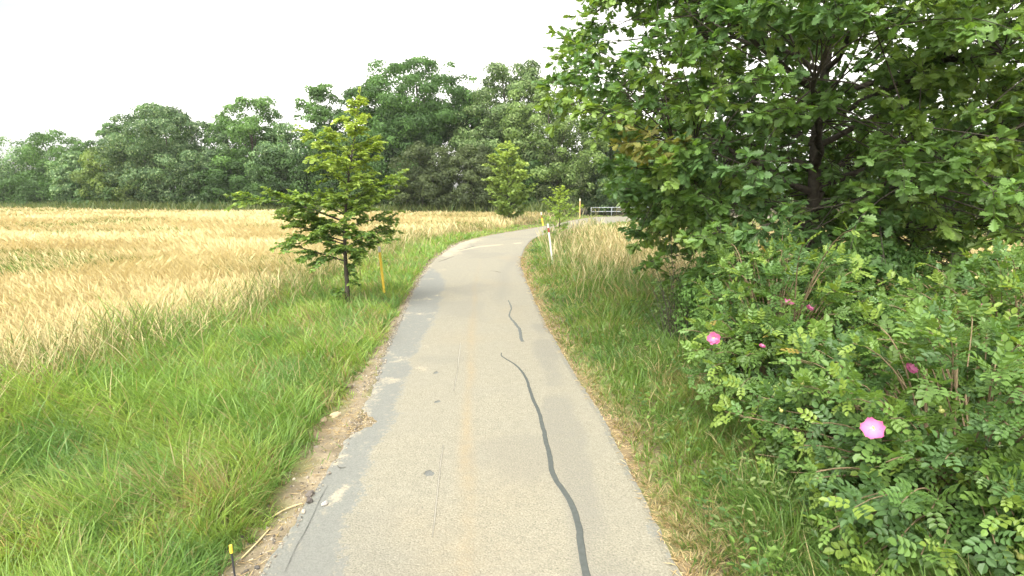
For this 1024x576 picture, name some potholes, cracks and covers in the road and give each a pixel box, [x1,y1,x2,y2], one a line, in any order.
crack [432,444,444,537]
